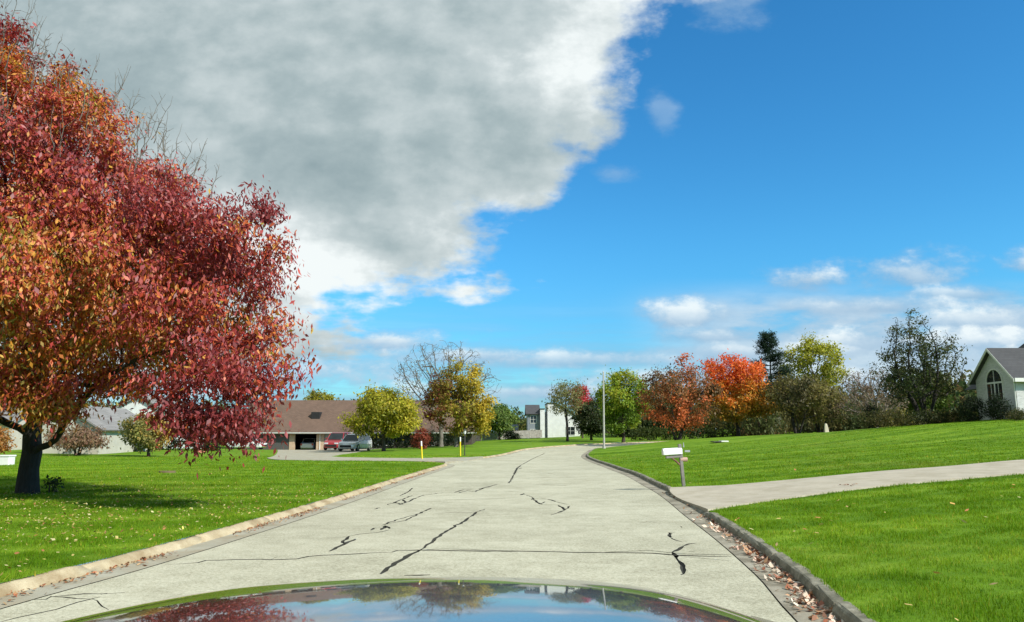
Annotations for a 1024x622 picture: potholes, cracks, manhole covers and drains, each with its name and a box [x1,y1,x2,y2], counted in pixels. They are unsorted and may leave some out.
crack [167,454,726,576]
crack [2,592,125,622]
